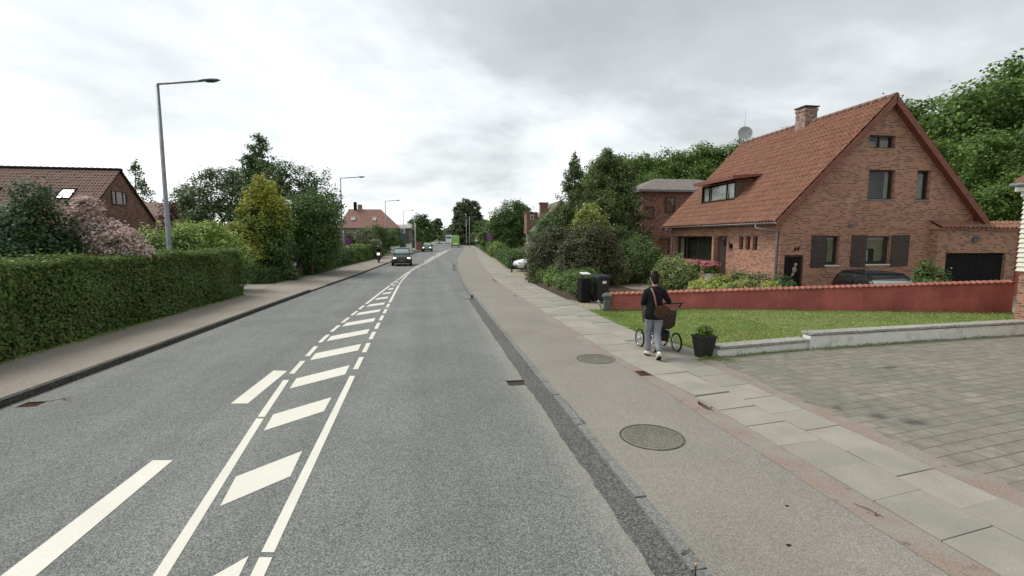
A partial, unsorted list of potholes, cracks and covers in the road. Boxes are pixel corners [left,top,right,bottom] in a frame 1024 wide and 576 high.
manhole cover [619,424,685,451]
manhole cover [577,354,615,364]
